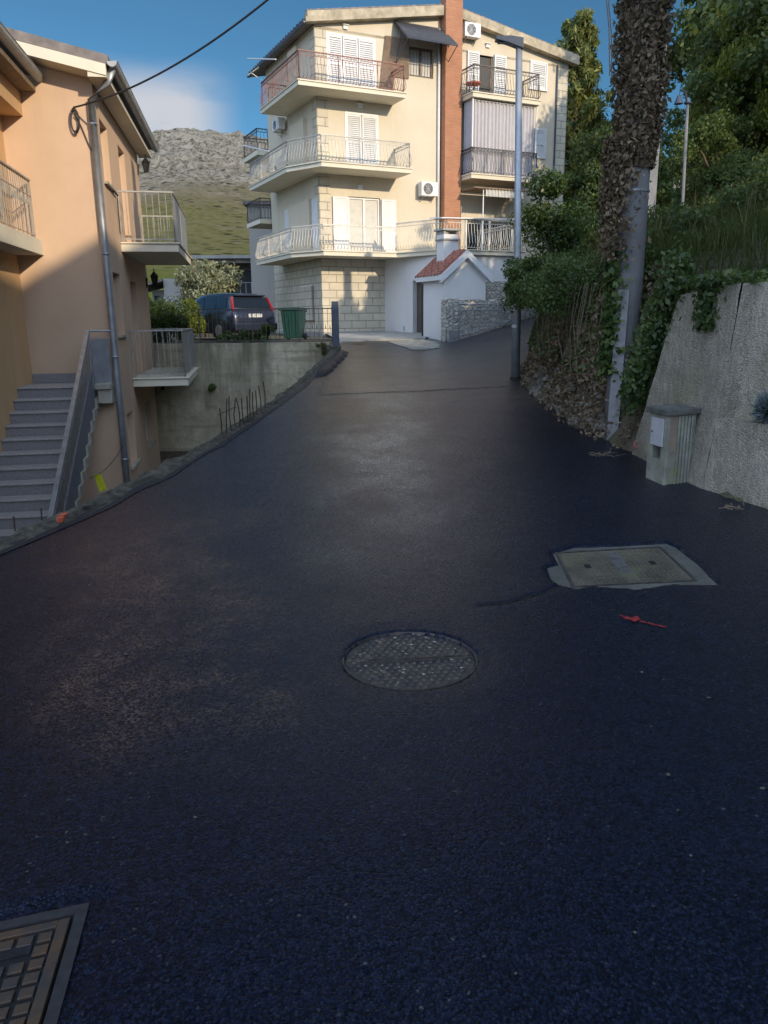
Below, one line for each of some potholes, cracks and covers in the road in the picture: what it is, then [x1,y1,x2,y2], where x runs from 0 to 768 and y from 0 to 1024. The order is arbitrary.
manhole cover [342,632,478,691]
manhole cover [547,544,717,590]
